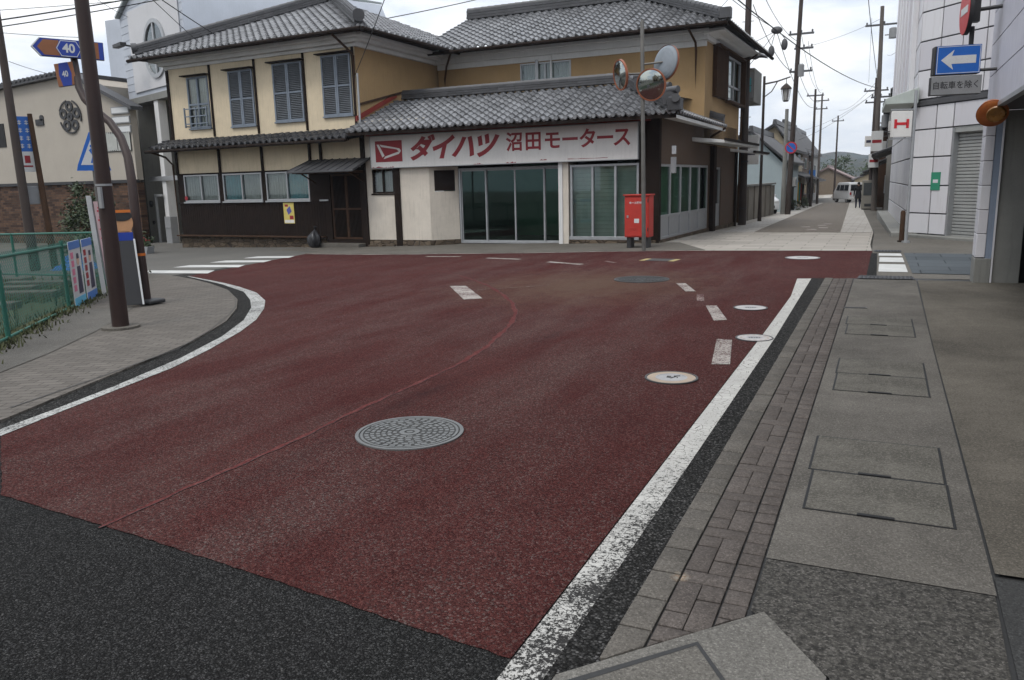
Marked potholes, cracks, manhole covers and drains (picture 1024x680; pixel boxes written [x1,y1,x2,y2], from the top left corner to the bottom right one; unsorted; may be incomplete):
manhole cover [735,334,774,342]
manhole cover [645,371,698,385]
manhole cover [355,416,464,451]
